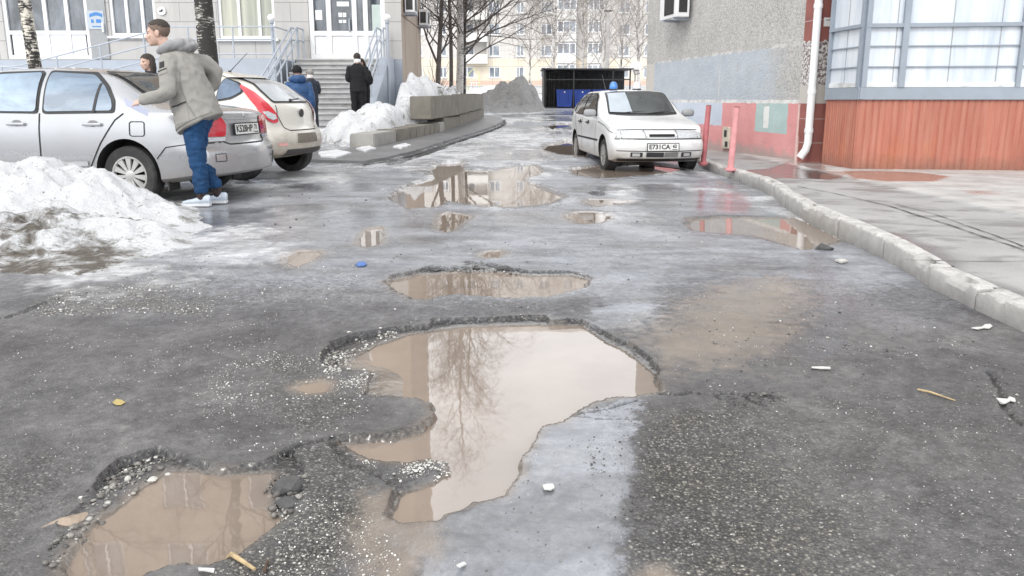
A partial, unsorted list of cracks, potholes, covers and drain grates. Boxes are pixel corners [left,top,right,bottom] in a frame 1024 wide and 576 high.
crack [980,370,1024,426]
pothole [681,214,845,250]
pothole [388,159,568,209]
pothole [319,314,665,529]
pothole [38,445,306,576]
pothole [381,265,594,300]
